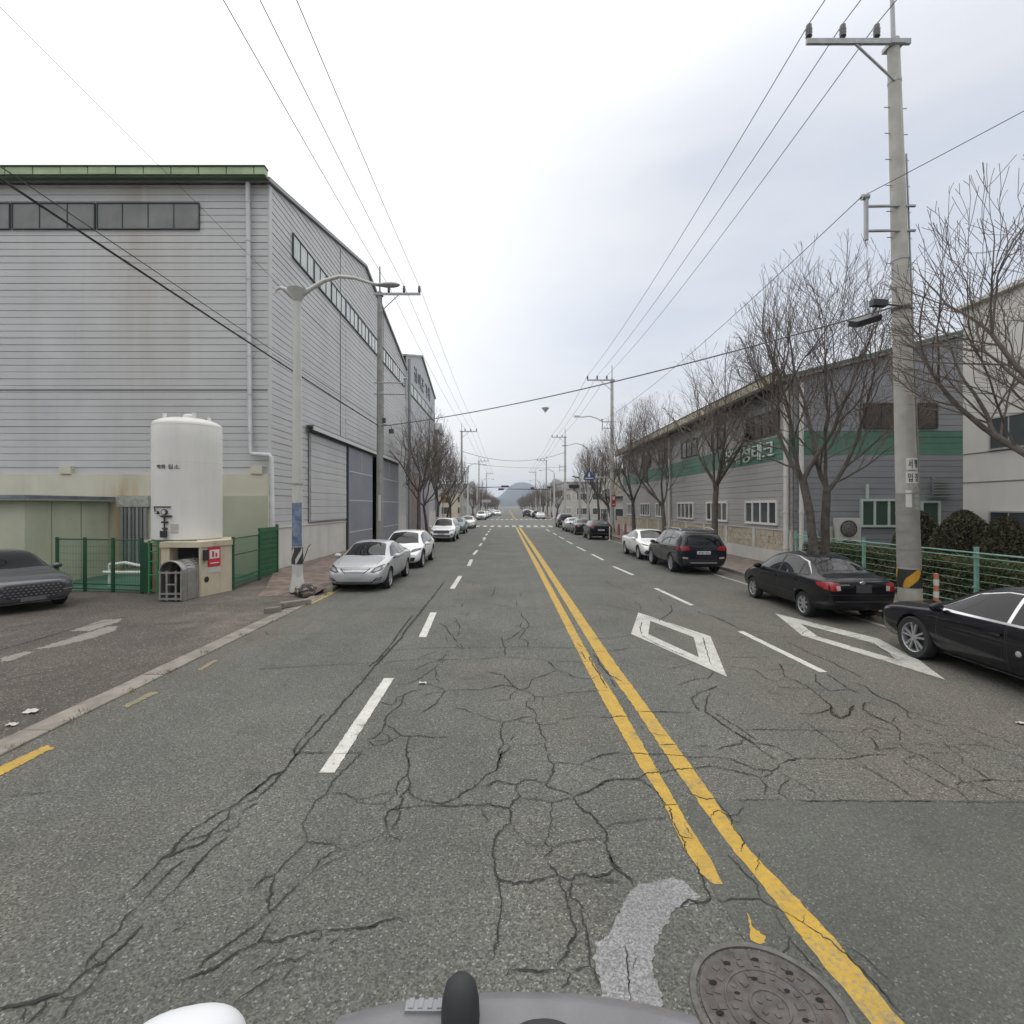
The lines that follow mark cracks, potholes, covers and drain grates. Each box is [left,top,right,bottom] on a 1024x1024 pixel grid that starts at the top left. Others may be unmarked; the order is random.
manhole cover [689,942,856,1024]
crack [0,578,901,1024]
crack [654,640,1023,800]
